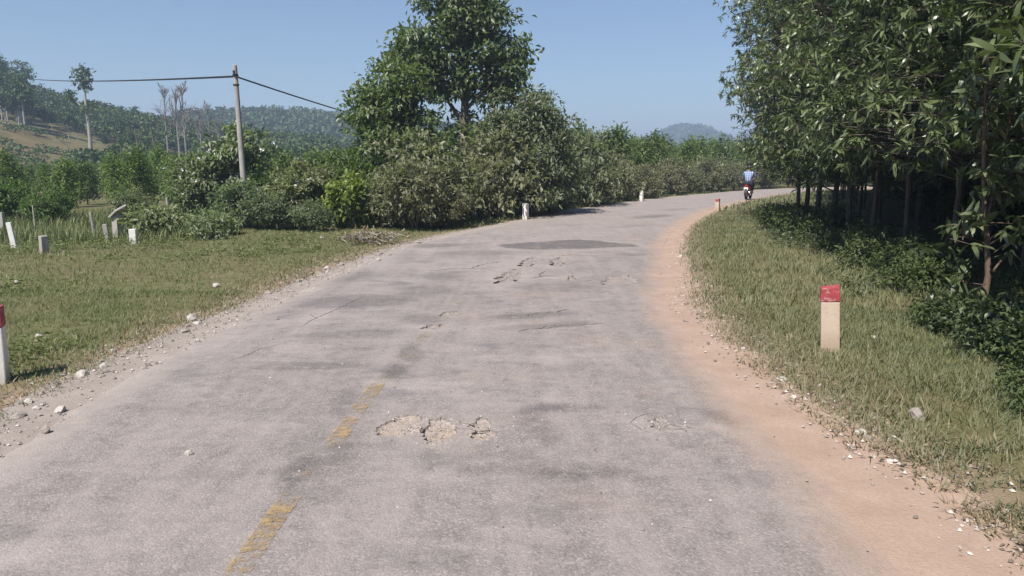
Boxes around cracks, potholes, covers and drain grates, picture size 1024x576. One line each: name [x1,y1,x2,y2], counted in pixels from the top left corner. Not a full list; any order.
pothole [375,414,424,438]
crack [501,309,601,331]
crack [230,295,365,361]
pothole [419,417,458,445]
pothole [646,416,686,433]
pothole [469,417,498,441]
